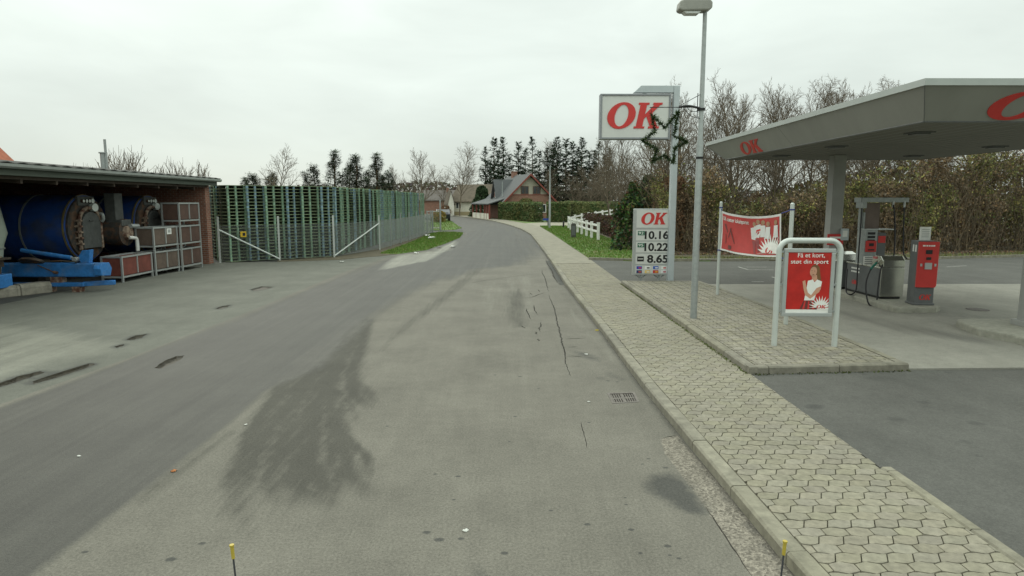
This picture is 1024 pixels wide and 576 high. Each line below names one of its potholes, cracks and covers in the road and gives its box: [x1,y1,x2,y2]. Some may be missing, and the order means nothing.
pothole [0,371,44,387]
drain grate [607,392,639,404]
pothole [155,355,185,369]
pothole [33,363,95,384]
crack [479,262,579,376]
